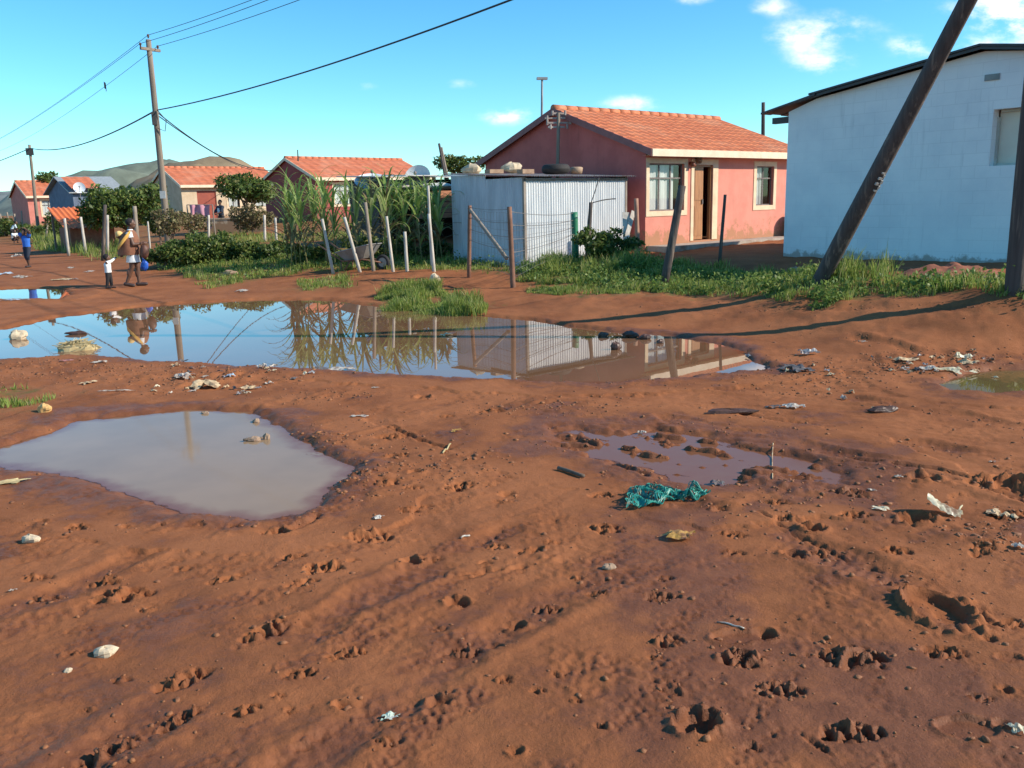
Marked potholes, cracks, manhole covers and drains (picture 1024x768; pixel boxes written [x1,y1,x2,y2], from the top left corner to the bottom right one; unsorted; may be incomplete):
pothole [0,402,371,524]
pothole [526,417,884,491]
